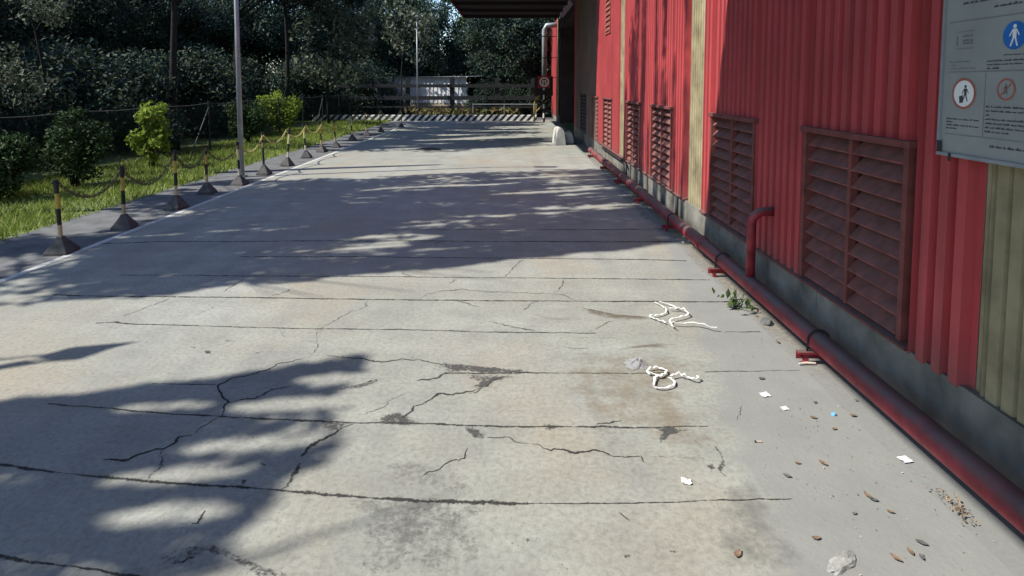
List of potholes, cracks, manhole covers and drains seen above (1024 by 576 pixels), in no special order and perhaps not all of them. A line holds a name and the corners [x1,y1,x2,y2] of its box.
crack [488,437,689,462]
crack [406,274,574,330]
crack [103,302,513,489]
